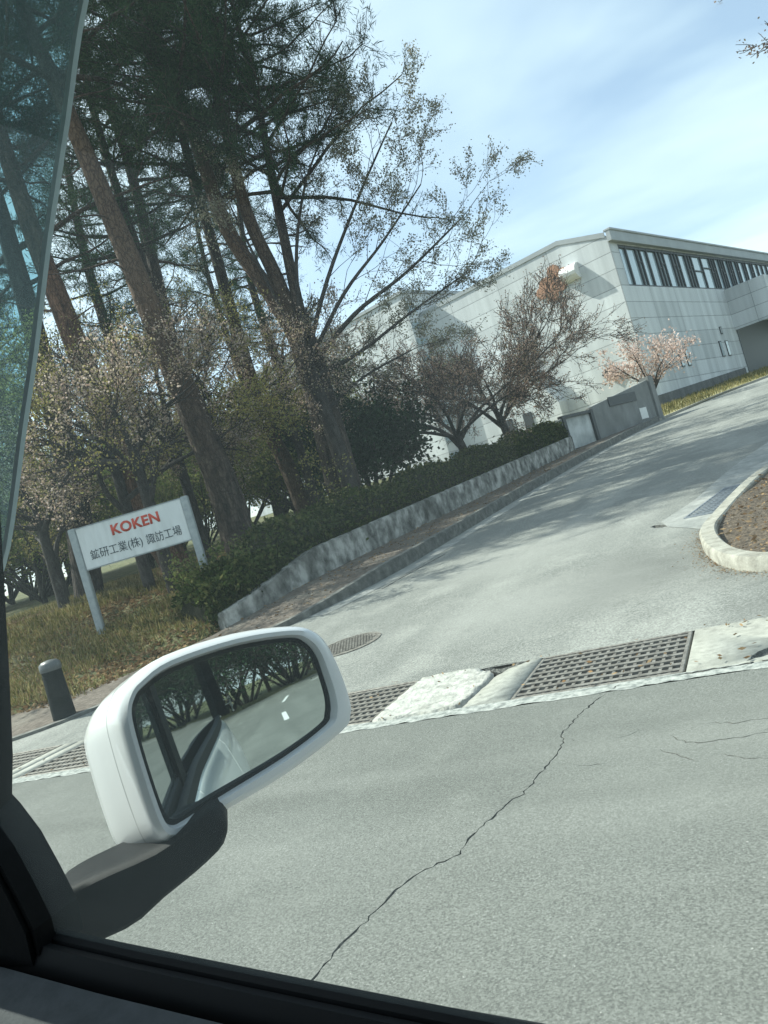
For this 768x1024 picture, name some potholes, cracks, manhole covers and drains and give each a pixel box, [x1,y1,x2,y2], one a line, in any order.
crack [660,718,768,761]
manhole cover [328,632,381,657]
drain grate [13,745,62,770]
drain grate [511,631,694,700]
drain grate [347,680,419,726]
drain grate [683,483,742,519]
crack [311,685,618,980]
